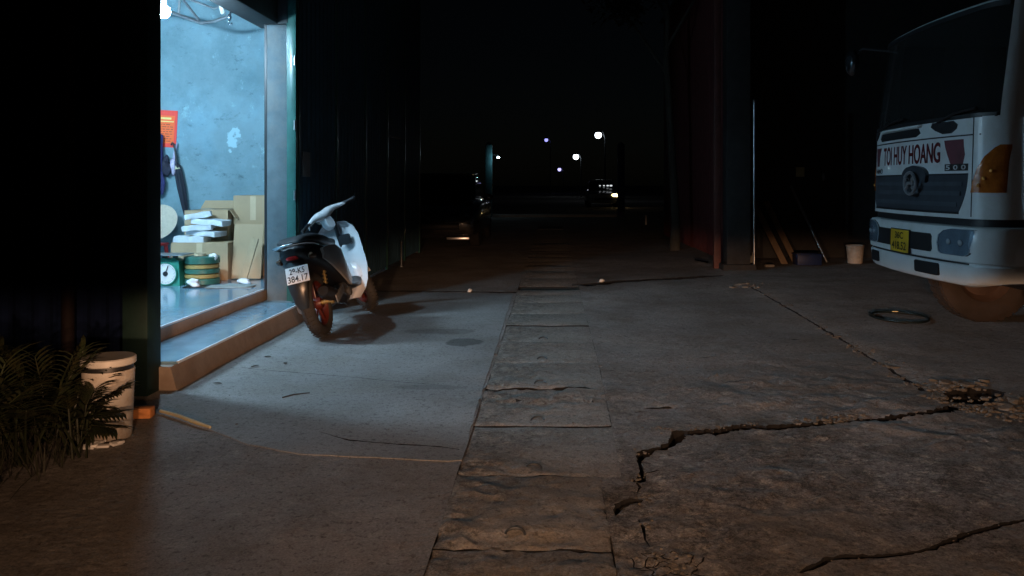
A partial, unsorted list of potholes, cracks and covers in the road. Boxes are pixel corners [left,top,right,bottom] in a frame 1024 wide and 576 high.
crack [799,519,1024,573]
crack [319,431,459,450]
pothole [940,387,1007,411]
crack [613,406,956,576]
